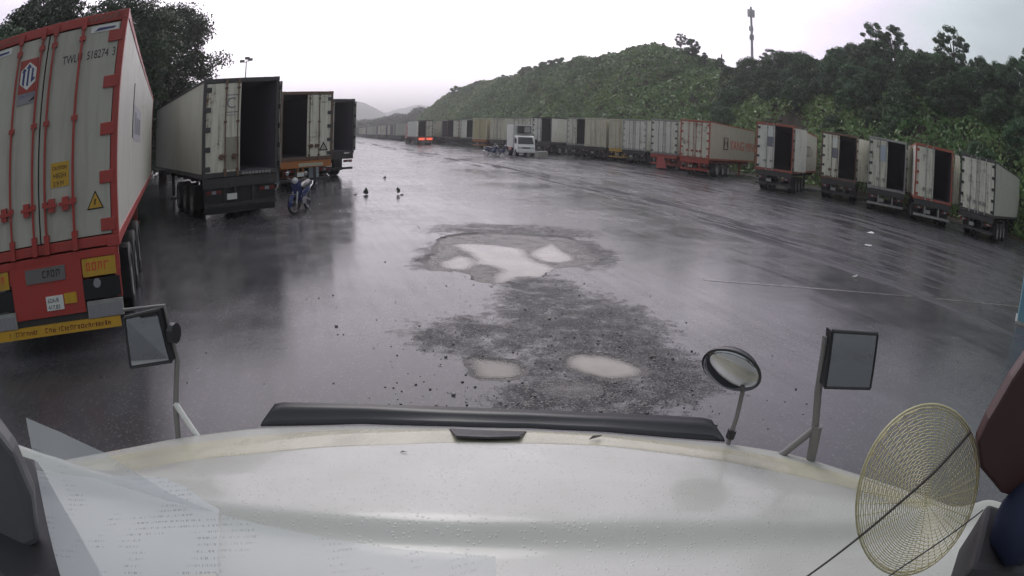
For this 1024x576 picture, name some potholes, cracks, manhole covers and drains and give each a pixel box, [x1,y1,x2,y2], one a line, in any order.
pothole [462,355,531,382]
pothole [423,232,601,284]
pothole [559,351,650,382]
